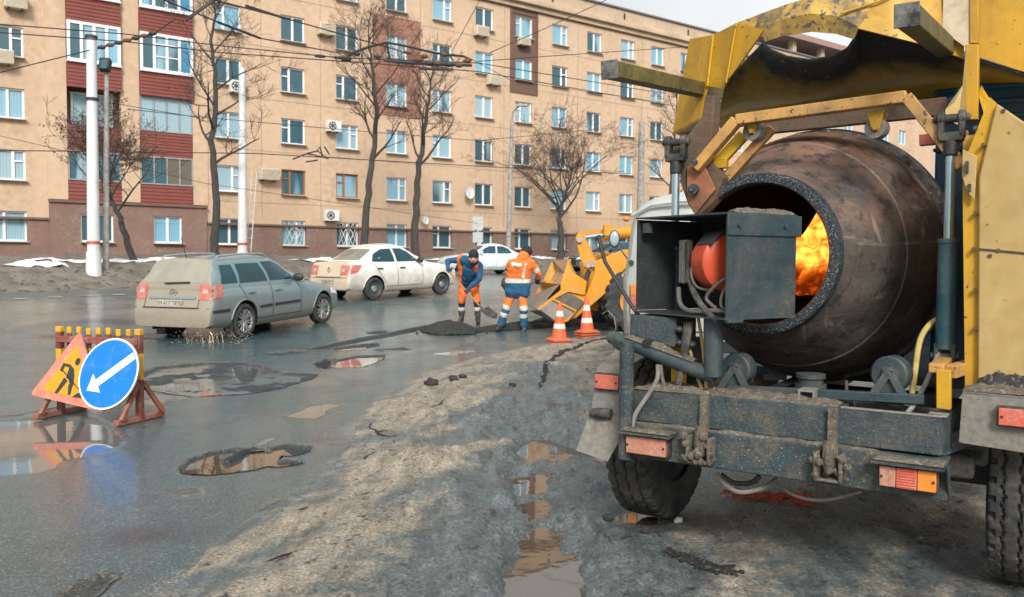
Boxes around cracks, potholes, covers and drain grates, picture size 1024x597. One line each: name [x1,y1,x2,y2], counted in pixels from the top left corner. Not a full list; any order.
pothole [266,459,303,467]
pothole [144,362,317,397]
pothole [314,358,337,369]
pothole [56,570,122,597]
pothole [268,443,311,457]
pothole [180,447,292,475]
pothole [324,355,384,369]
crack [538,337,607,387]
